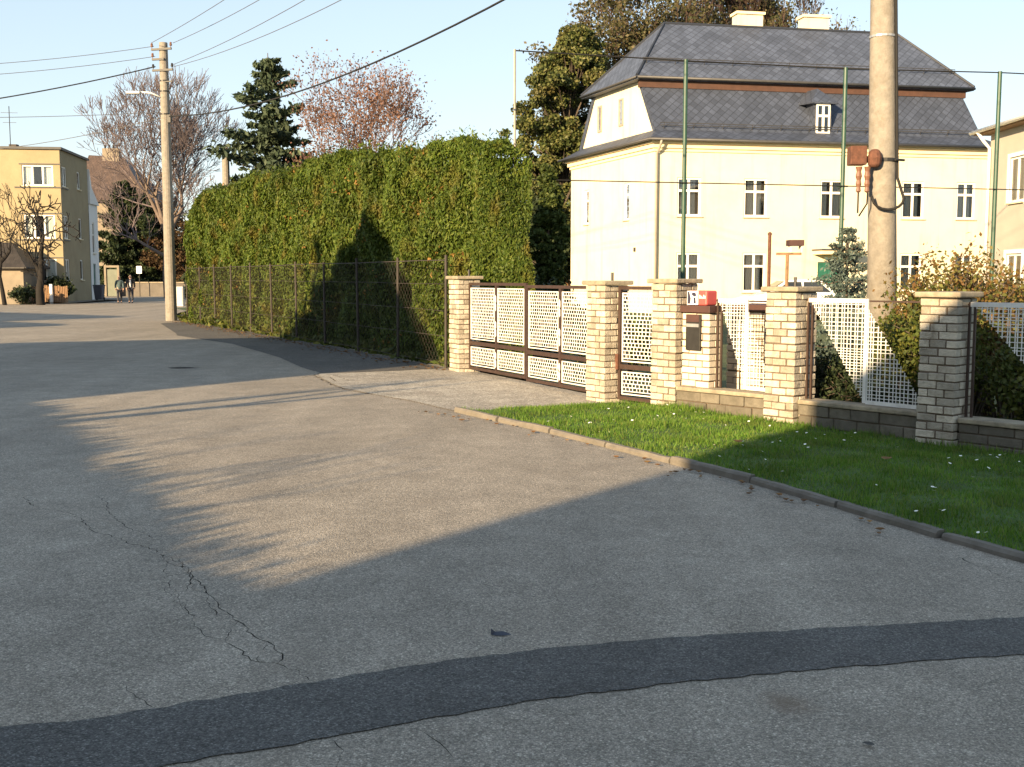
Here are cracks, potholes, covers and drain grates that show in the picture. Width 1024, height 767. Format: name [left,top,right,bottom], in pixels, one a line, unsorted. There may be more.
crack [61,497,310,681]
